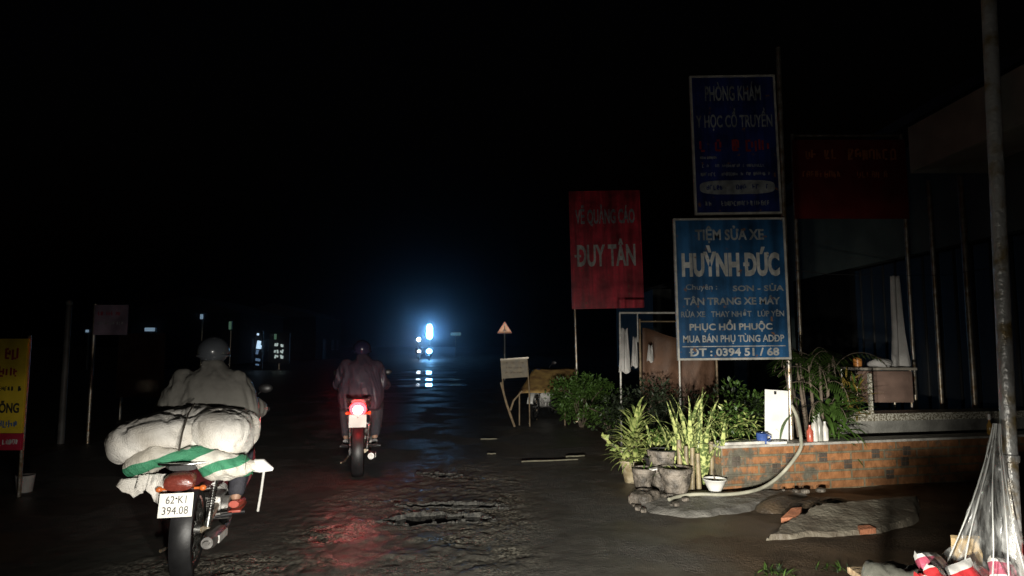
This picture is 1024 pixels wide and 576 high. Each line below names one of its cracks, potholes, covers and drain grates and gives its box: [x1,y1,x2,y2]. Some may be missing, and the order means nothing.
pothole [386,500,511,510]
pothole [416,471,464,479]
pothole [372,510,502,527]
